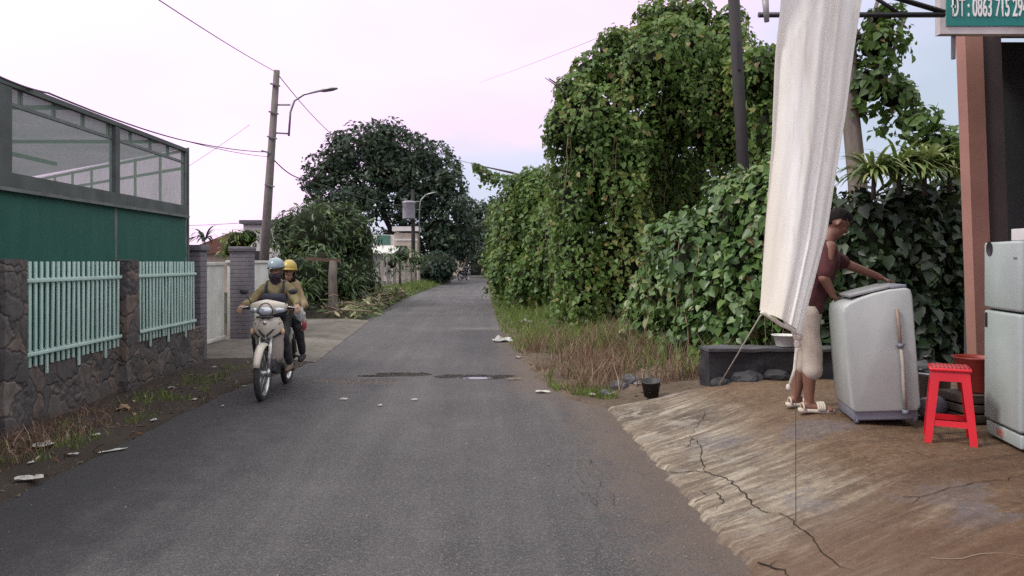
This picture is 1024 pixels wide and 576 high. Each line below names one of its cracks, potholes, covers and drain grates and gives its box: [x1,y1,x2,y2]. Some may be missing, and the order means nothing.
crack [671,410,855,576]
crack [565,459,614,505]
crack [903,474,1023,507]
